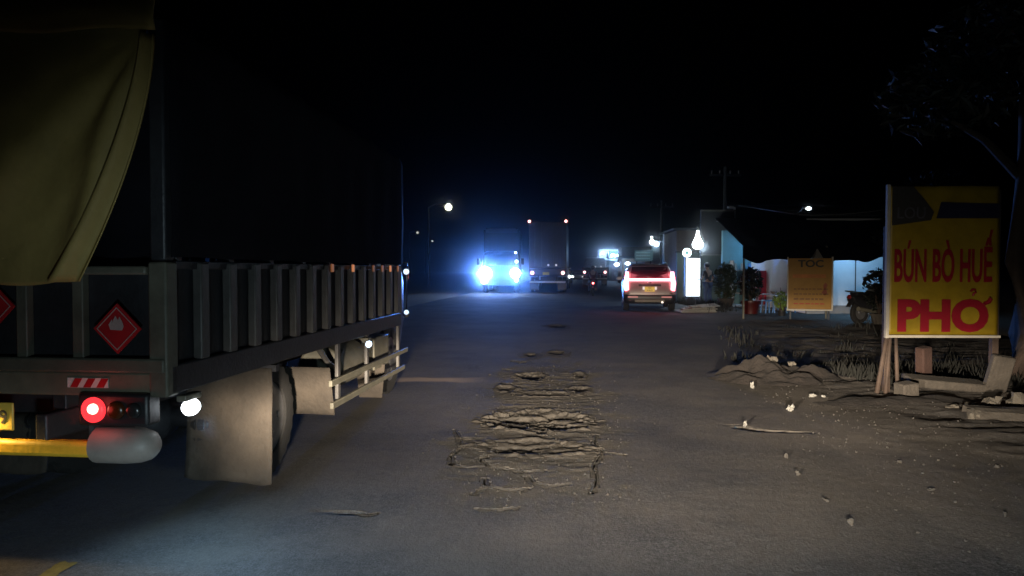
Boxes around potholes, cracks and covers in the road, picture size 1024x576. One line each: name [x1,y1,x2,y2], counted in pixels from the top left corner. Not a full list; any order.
crack [447,429,569,512]
pothole [472,408,607,437]
pothole [511,371,550,382]
crack [588,435,624,495]
pothole [570,371,589,380]
pothole [459,437,603,459]
pothole [517,351,542,359]
pothole [493,384,522,393]
pothole [541,349,572,357]
pothole [563,385,593,393]
pothole [502,390,588,398]
